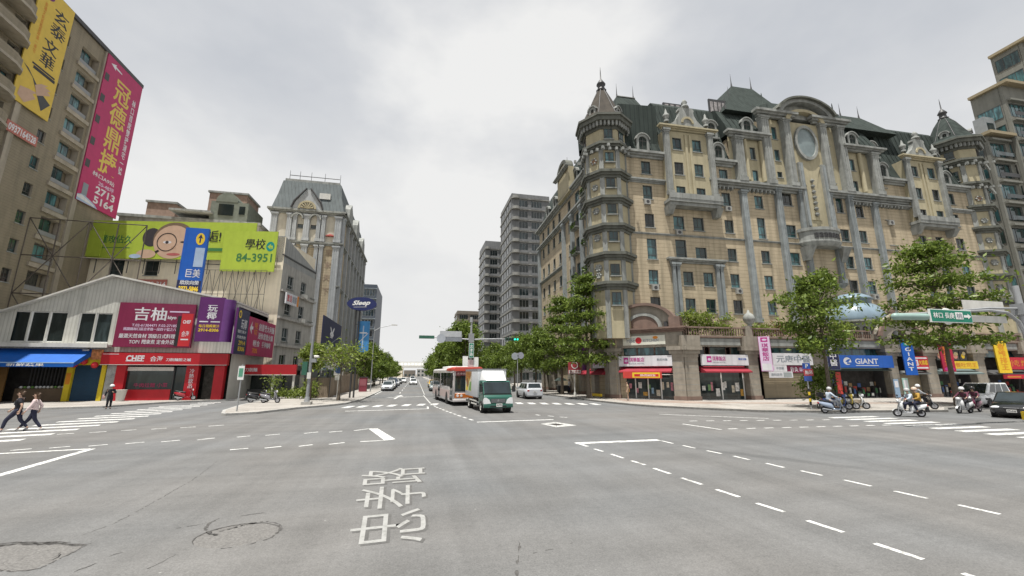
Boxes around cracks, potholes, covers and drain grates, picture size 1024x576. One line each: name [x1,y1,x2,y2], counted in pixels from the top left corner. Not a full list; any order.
crack [514,543,571,576]
